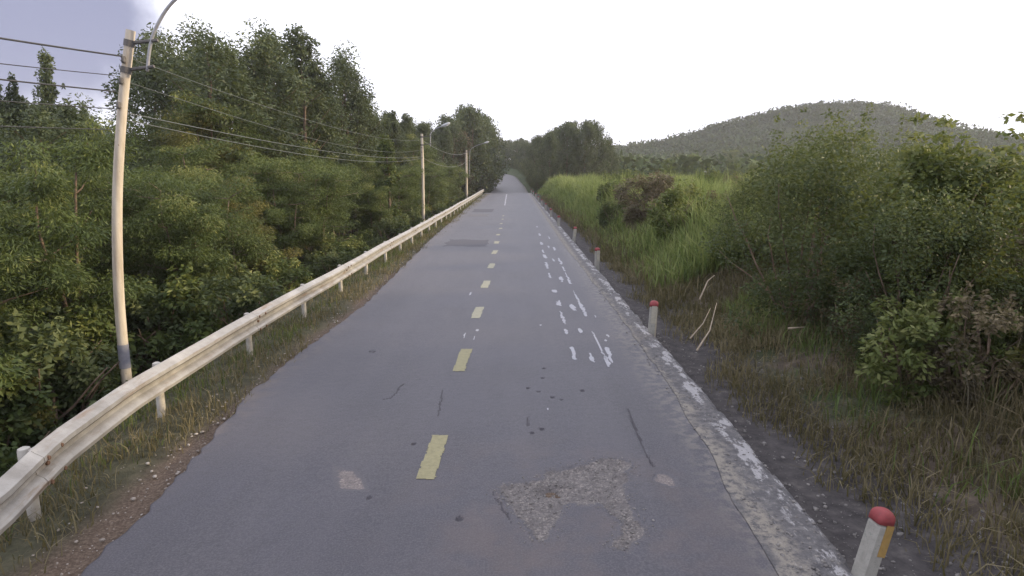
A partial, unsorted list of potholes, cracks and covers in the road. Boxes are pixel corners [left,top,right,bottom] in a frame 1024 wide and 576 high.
crack [492,491,512,523]
pothole [495,457,652,554]
crack [628,409,656,467]
